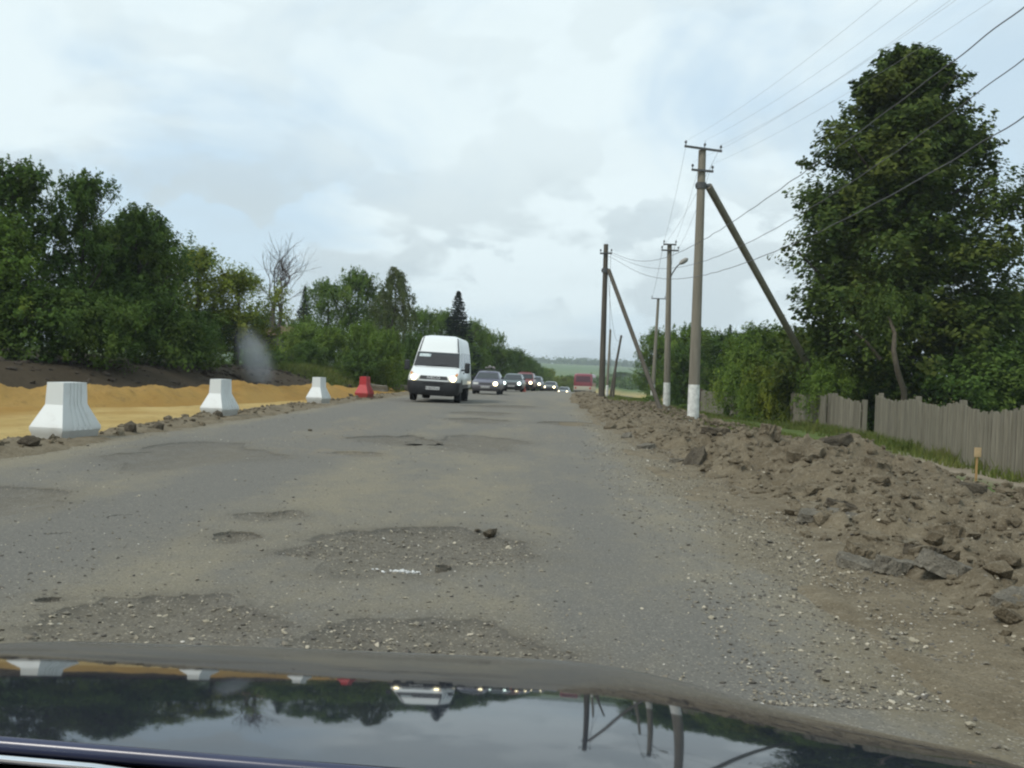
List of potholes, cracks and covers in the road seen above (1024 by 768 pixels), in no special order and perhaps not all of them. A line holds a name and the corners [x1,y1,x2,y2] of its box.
pothole [19,592,298,645]
pothole [273,526,540,579]
pothole [405,435,530,453]
pothole [212,531,262,544]
pothole [0,486,74,515]
pothole [275,616,583,663]
pothole [346,435,443,447]
pothole [233,510,310,521]
